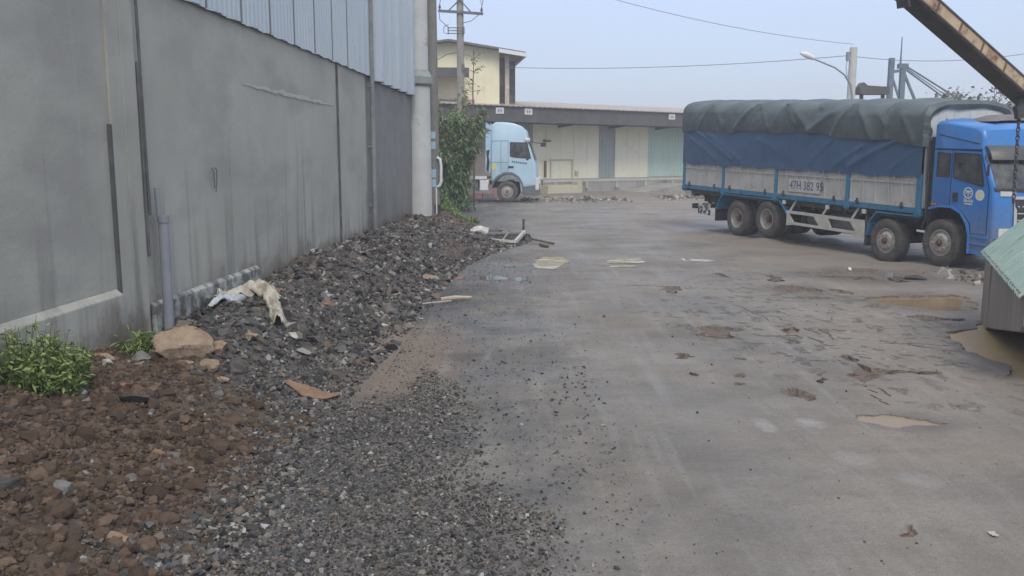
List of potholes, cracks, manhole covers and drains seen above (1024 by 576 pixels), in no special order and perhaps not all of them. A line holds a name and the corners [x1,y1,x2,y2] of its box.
pothole [855,414,947,428]
pothole [865,294,979,311]
pothole [946,323,1024,379]
pothole [696,326,745,339]
crack [729,303,851,346]
pothole [780,387,817,401]
pothole [772,285,823,293]
